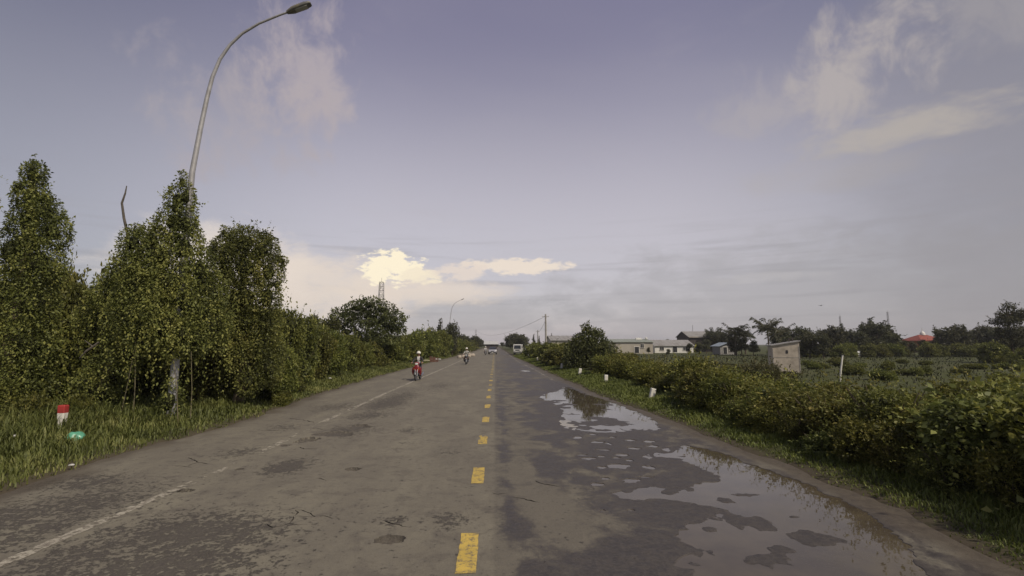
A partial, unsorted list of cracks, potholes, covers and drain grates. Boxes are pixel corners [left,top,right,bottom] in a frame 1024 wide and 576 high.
pothole [374,535,406,544]
crack [267,510,331,528]
